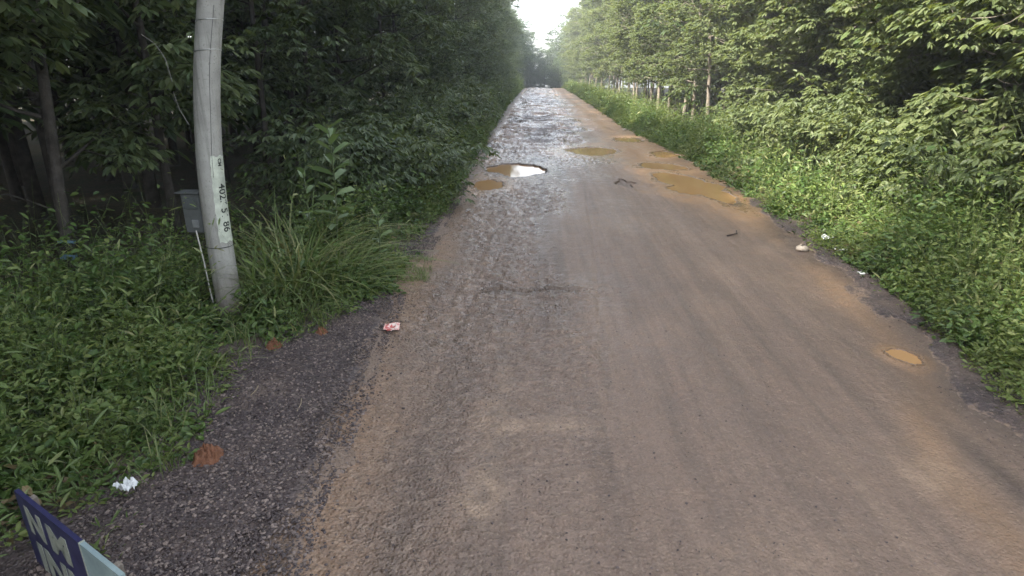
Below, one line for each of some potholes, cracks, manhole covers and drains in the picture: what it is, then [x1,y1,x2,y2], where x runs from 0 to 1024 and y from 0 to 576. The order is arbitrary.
pothole [649,171,742,207]
pothole [637,162,691,171]
pothole [883,348,924,366]
crack [474,282,579,297]
pothole [562,147,622,156]
pothole [484,163,550,178]
pothole [468,179,505,191]
